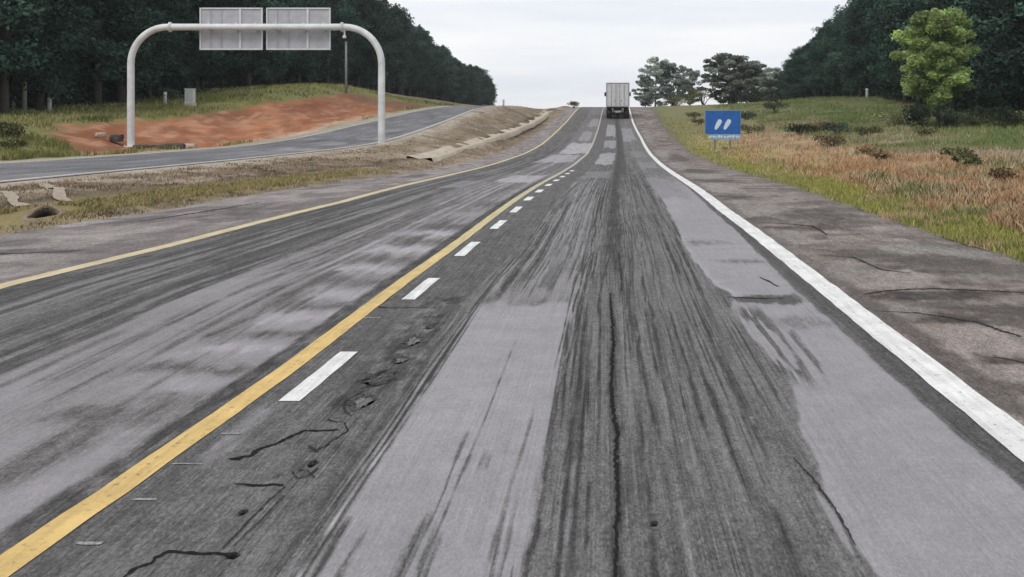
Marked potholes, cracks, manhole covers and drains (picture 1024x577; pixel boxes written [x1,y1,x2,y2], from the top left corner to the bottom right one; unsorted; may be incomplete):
crack [727,277,785,299]
crack [609,251,623,577]
crack [123,368,397,577]
crack [830,255,1021,336]
pothole [402,333,425,347]
pothole [358,369,398,386]
pothole [350,392,379,410]
